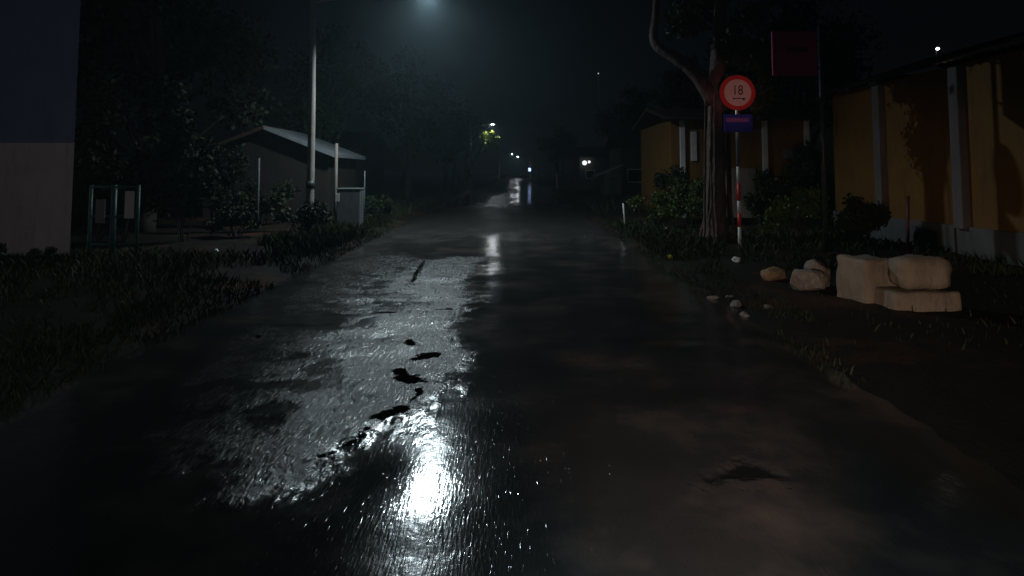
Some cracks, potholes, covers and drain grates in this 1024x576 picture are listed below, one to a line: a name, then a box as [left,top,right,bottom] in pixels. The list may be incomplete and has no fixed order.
pothole [352,402,422,427]
pothole [679,449,814,494]
pothole [396,337,426,348]
pothole [377,365,439,388]
pothole [399,349,452,364]
crack [405,259,430,284]
